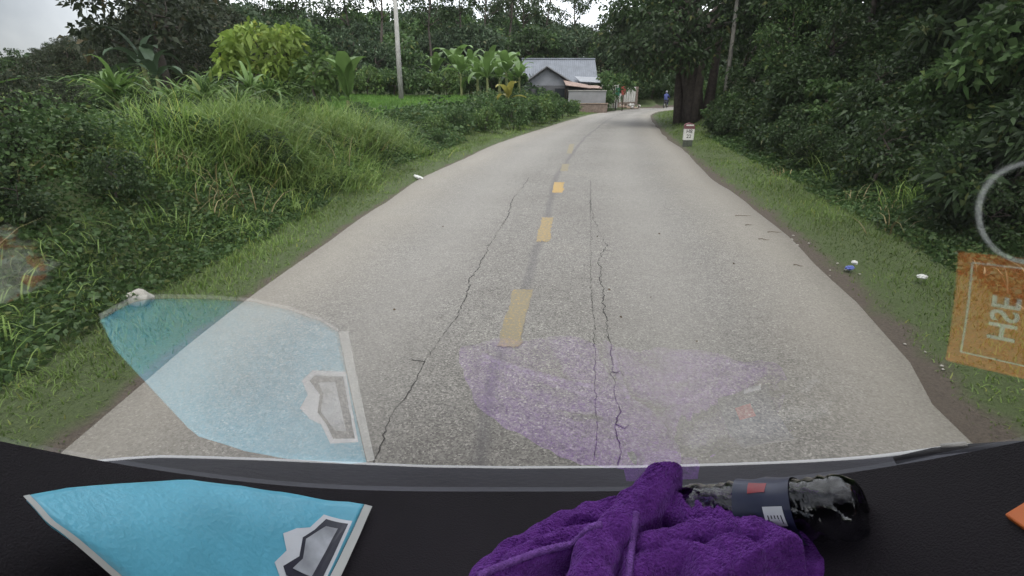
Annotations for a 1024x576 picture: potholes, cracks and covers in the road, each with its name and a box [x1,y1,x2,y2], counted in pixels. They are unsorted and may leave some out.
crack [457,177,529,317]
crack [589,182,614,317]
